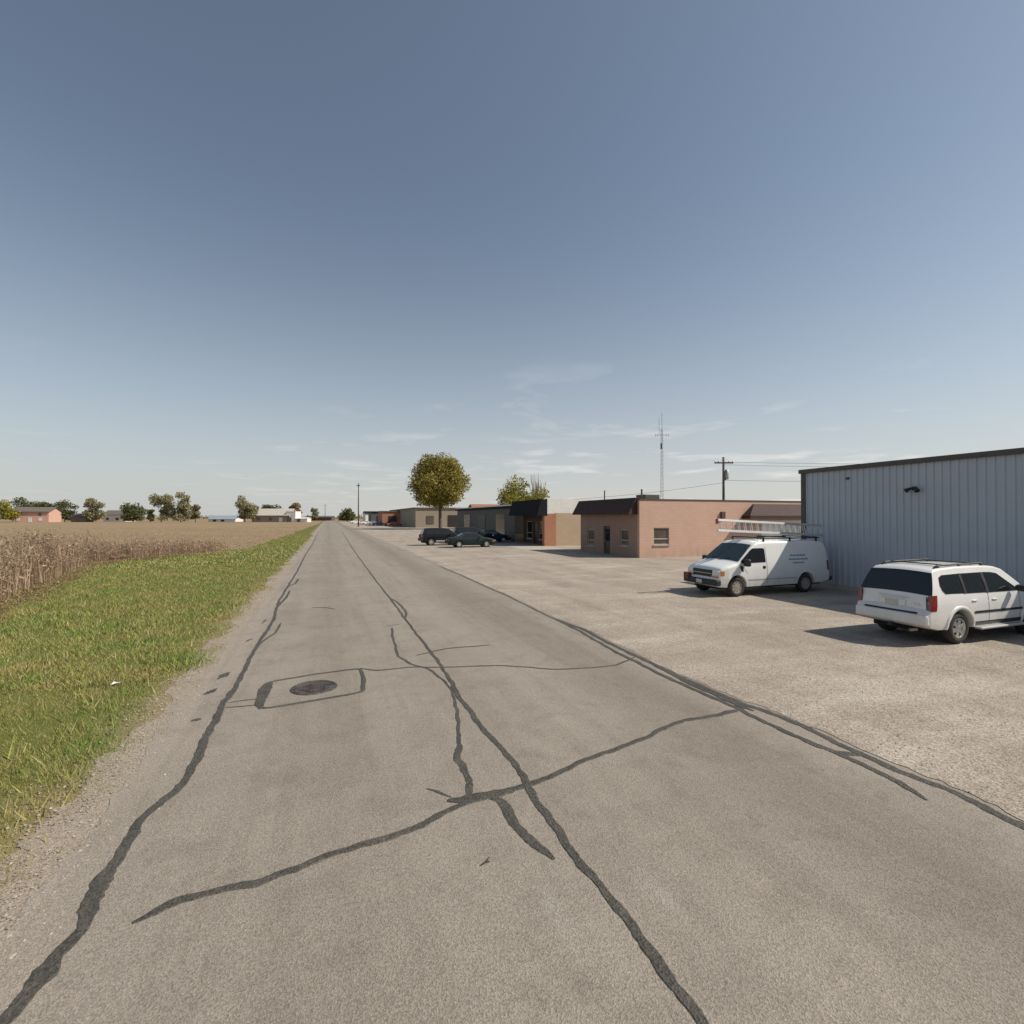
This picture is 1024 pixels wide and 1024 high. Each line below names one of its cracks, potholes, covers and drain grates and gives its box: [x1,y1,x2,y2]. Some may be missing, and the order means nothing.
crack [132,708,744,924]
manhole cover [290,680,338,695]
